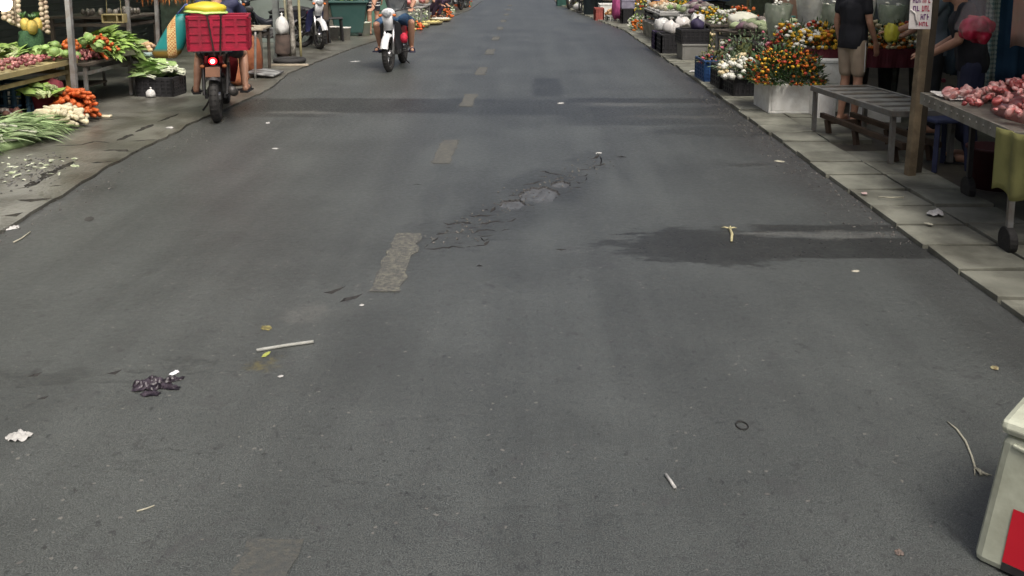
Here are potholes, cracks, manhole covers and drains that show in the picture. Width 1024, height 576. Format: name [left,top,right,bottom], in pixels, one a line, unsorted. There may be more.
pothole [518,186,561,203]
pothole [499,199,526,210]
crack [427,155,624,266]
crack [324,286,362,302]
pothole [551,180,571,188]
